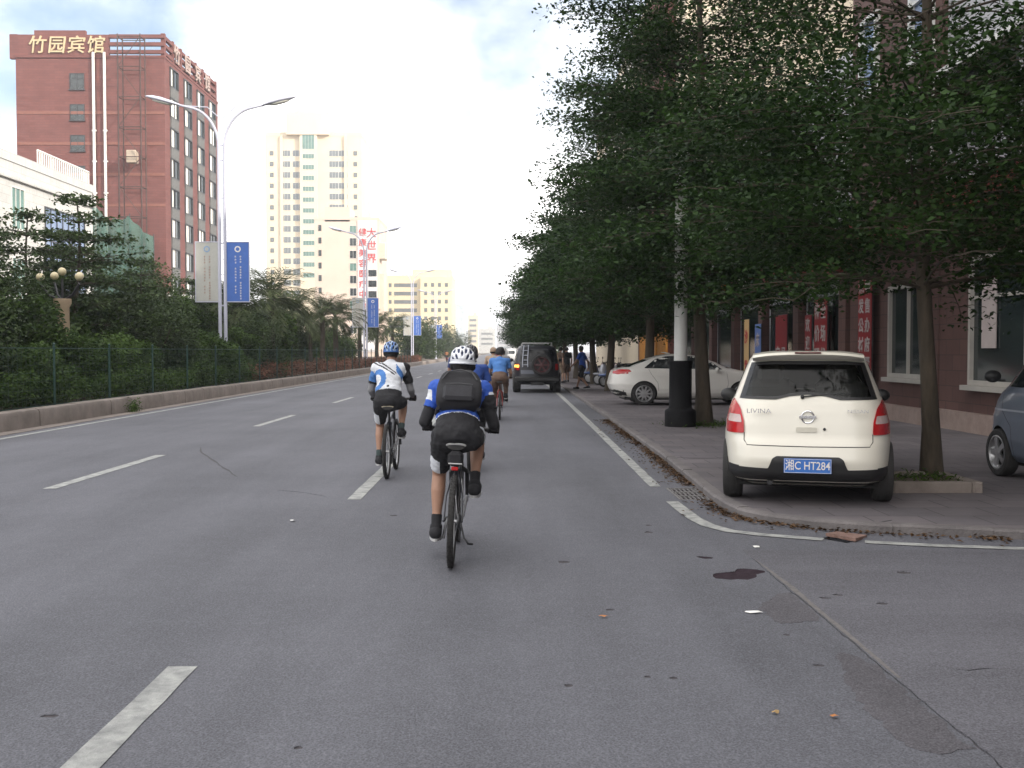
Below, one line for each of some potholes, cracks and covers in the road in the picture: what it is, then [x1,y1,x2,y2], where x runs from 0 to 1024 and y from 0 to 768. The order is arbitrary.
crack [200,448,237,477]
drain grate [666,488,709,500]
